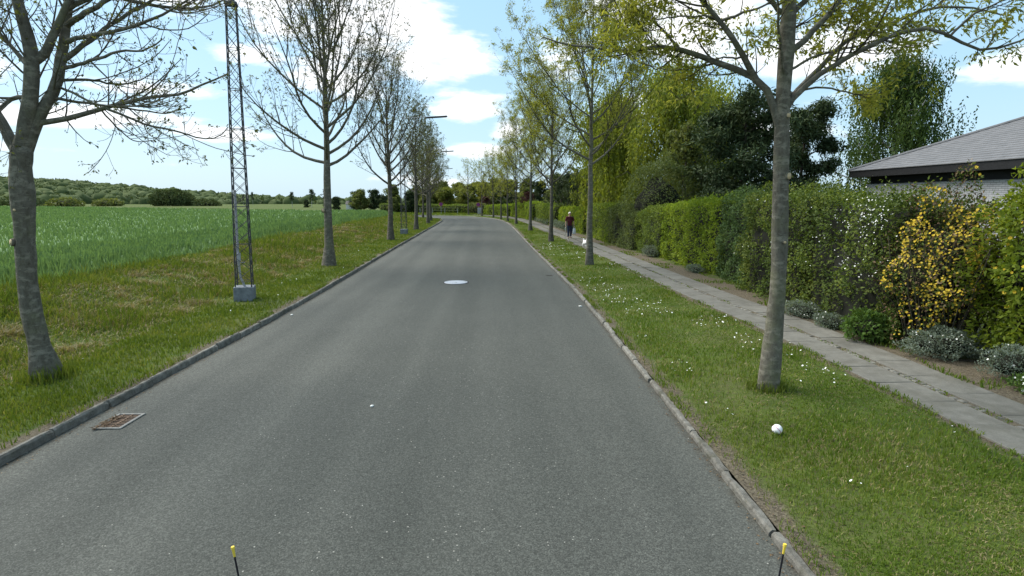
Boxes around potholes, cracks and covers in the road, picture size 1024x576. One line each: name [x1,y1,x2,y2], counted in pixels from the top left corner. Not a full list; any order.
drain grate [90,413,146,429]
